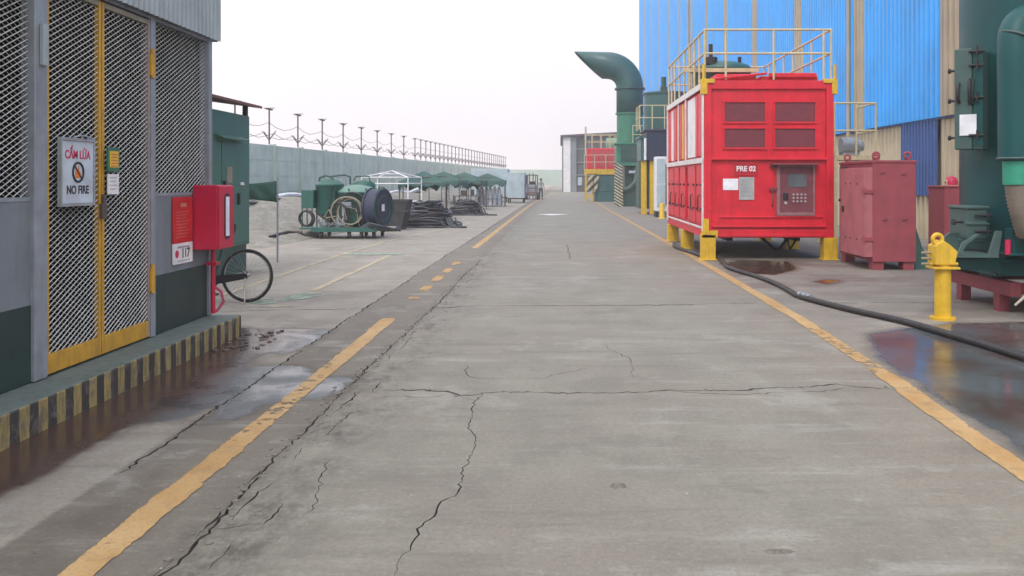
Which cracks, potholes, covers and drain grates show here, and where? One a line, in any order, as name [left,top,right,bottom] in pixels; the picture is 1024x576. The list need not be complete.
crack [387,368,890,575]
crack [113,211,733,576]
